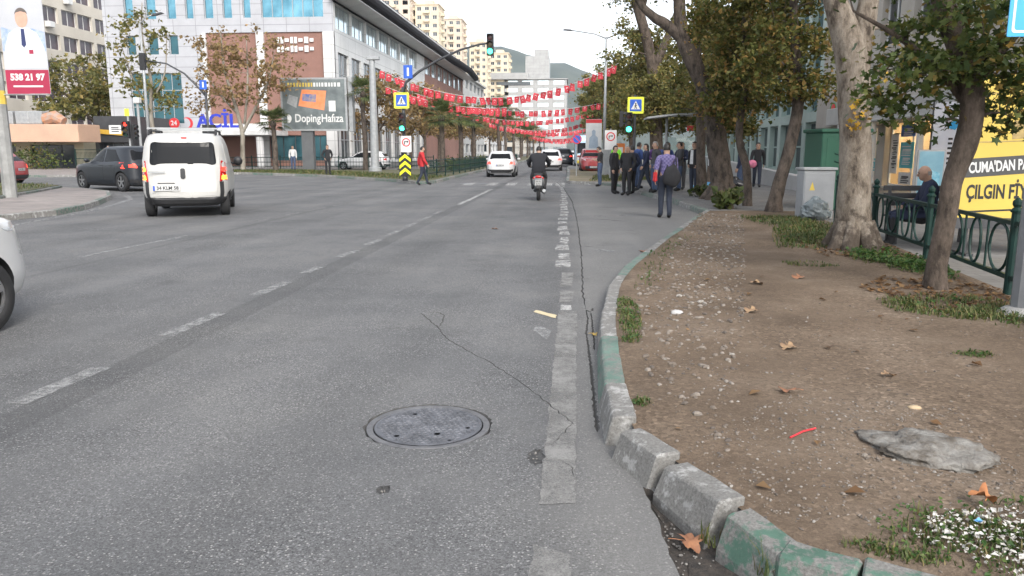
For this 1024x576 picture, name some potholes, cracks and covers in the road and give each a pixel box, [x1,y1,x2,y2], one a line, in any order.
pothole [527,449,546,466]
manhole cover [362,404,492,450]
crack [422,312,572,452]
